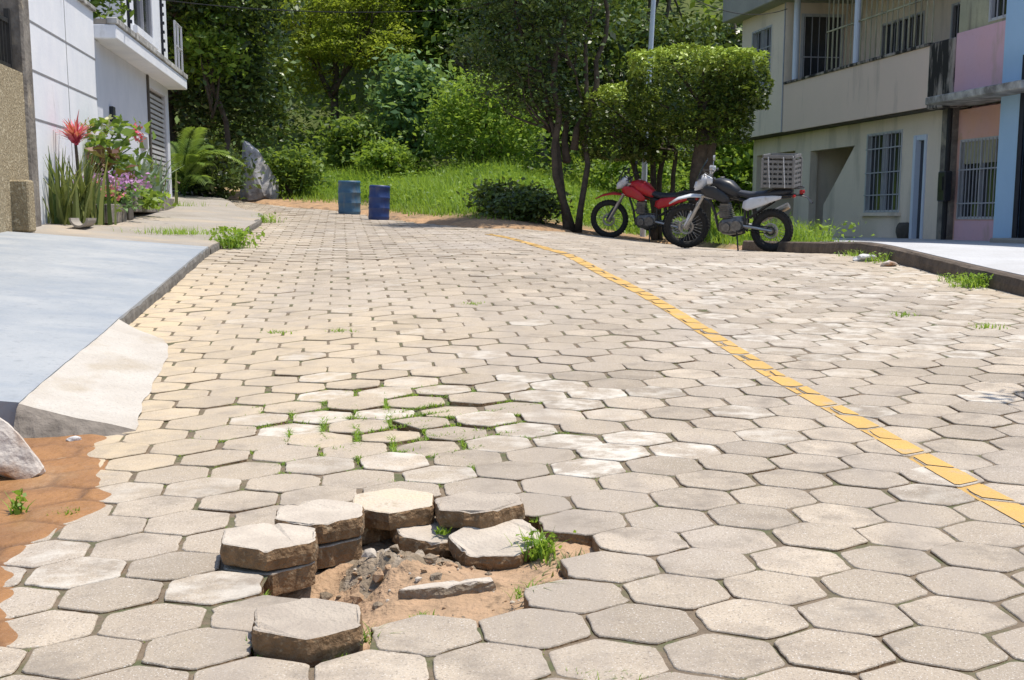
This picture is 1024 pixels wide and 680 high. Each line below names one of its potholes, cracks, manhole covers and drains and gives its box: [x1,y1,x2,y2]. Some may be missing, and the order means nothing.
pothole [276,516,594,668]
